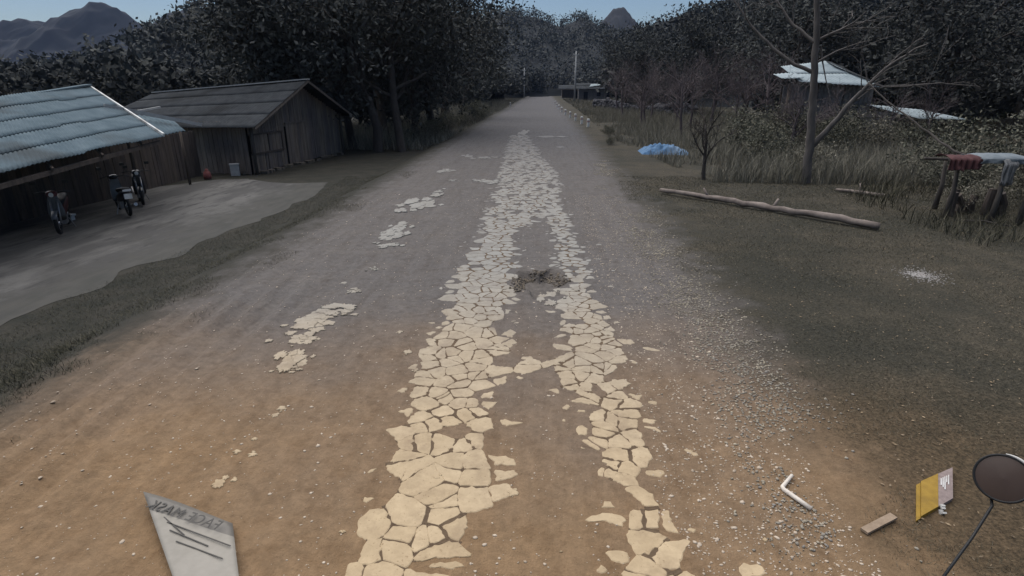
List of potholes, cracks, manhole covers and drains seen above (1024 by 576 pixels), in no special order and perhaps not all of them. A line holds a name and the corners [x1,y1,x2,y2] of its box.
crack [545,212,682,576]
pothole [509,268,571,300]
crack [357,137,563,576]
